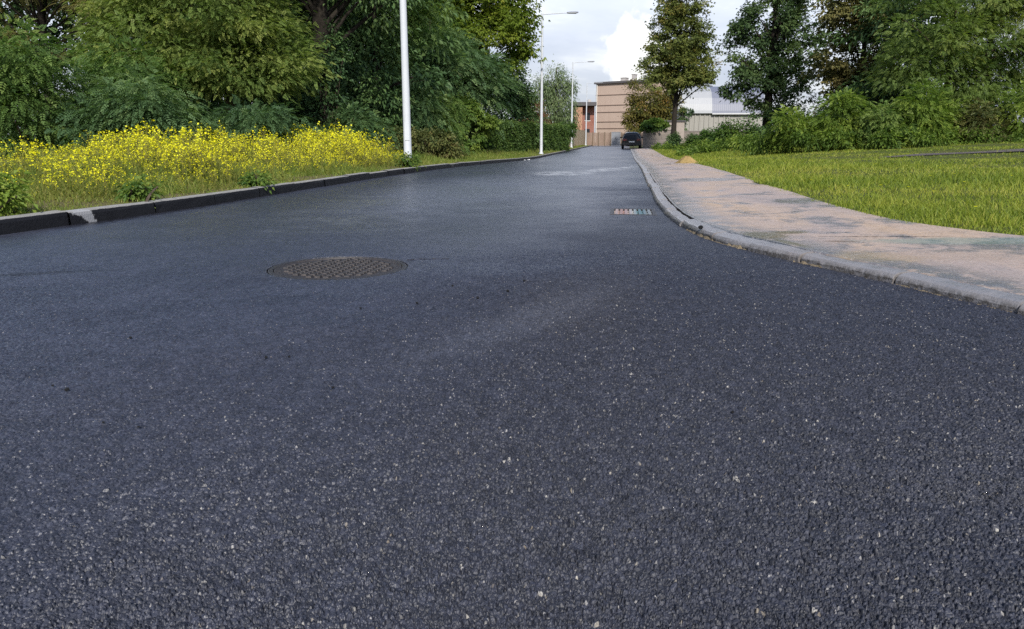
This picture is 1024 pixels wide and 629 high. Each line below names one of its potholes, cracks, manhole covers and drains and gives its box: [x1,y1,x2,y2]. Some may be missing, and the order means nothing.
manhole cover [268,257,407,280]
